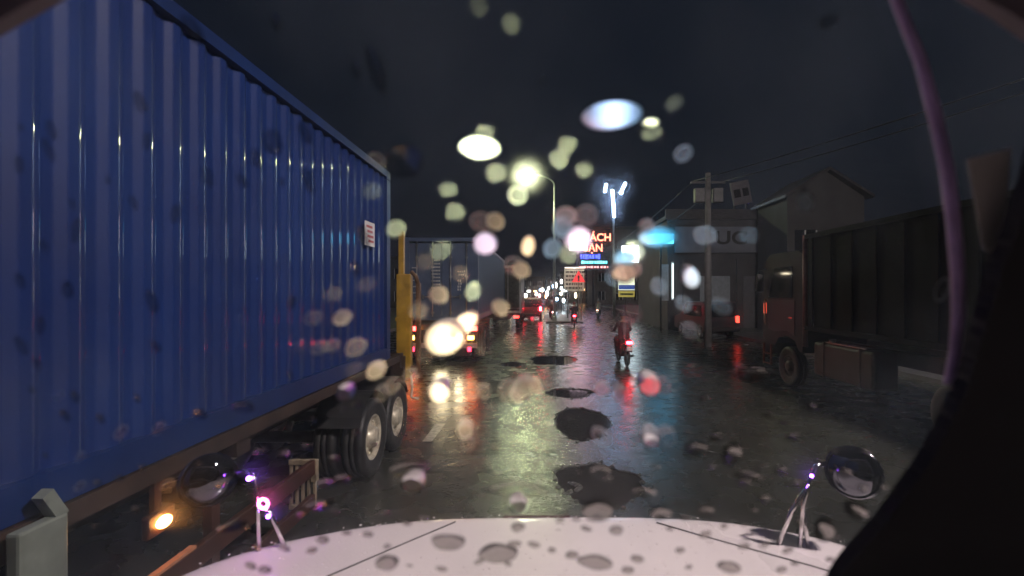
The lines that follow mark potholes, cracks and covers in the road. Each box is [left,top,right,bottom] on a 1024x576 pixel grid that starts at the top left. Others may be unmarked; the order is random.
pothole [530,355,579,365]
pothole [552,460,645,510]
pothole [552,407,613,442]
pothole [545,387,596,399]
